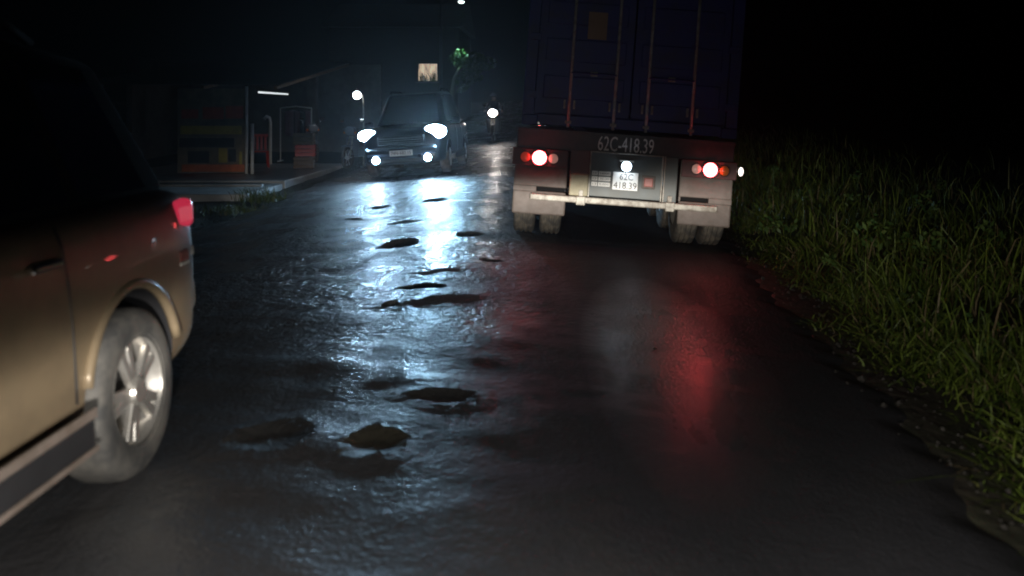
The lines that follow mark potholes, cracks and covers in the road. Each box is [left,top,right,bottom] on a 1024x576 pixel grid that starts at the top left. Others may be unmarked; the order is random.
pothole [377,218,432,226]
pothole [377,280,461,294]
pothole [414,196,455,204]
pothole [367,297,413,312]
pothole [446,230,495,238]
pothole [366,236,432,251]
pothole [466,256,515,264]
pothole [189,410,341,463]
pothole [313,416,435,471]
pothole [382,381,499,414]
